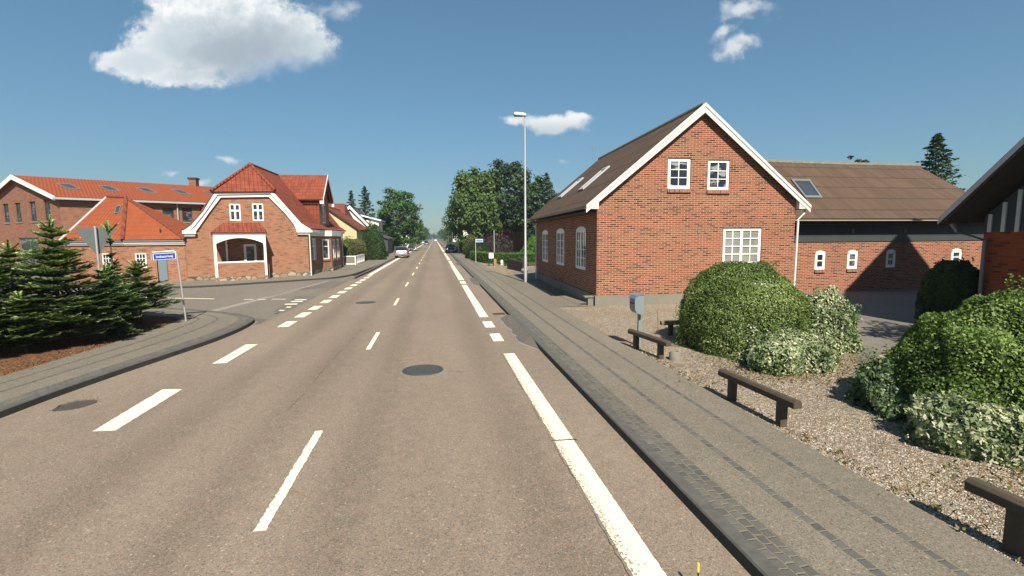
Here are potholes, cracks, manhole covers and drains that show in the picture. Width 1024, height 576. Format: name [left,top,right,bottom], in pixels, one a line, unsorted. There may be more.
manhole cover [402,364,443,376]
